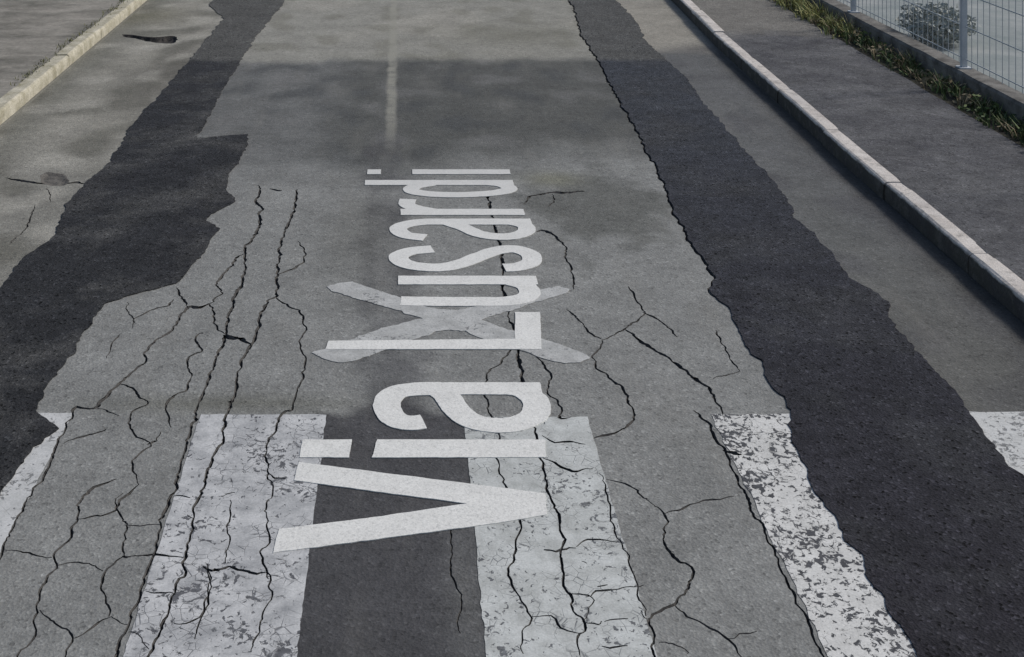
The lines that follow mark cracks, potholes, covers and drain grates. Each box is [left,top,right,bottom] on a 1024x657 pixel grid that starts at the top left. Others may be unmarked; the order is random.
crack [449,530,463,633]
pothole [122,34,178,44]
